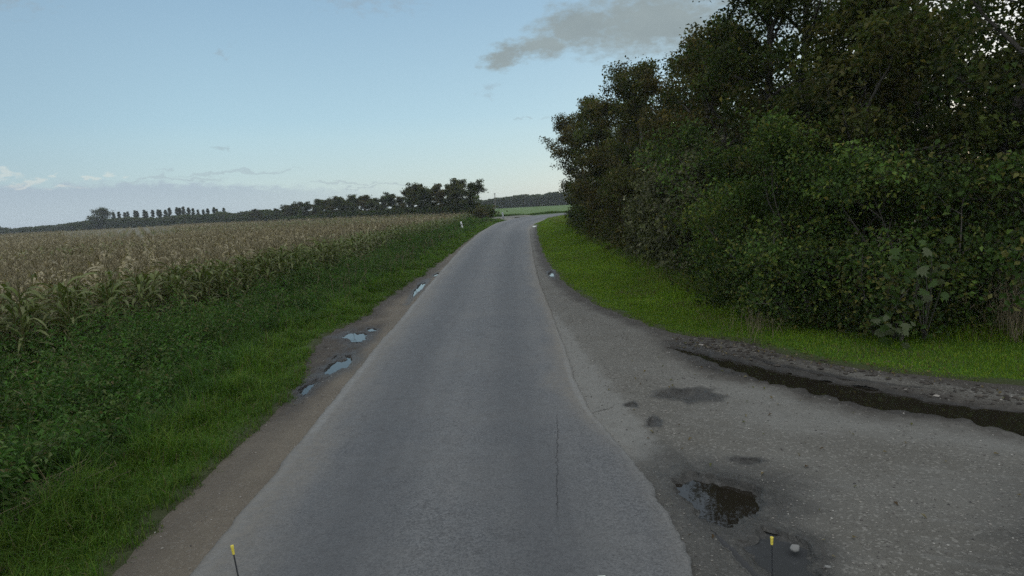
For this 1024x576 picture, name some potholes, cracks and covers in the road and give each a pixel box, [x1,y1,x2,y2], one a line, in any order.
pothole [657,462,783,547]
pothole [291,374,323,401]
pothole [315,351,358,381]
pothole [720,516,831,576]
pothole [407,279,429,302]
pothole [337,331,372,344]
